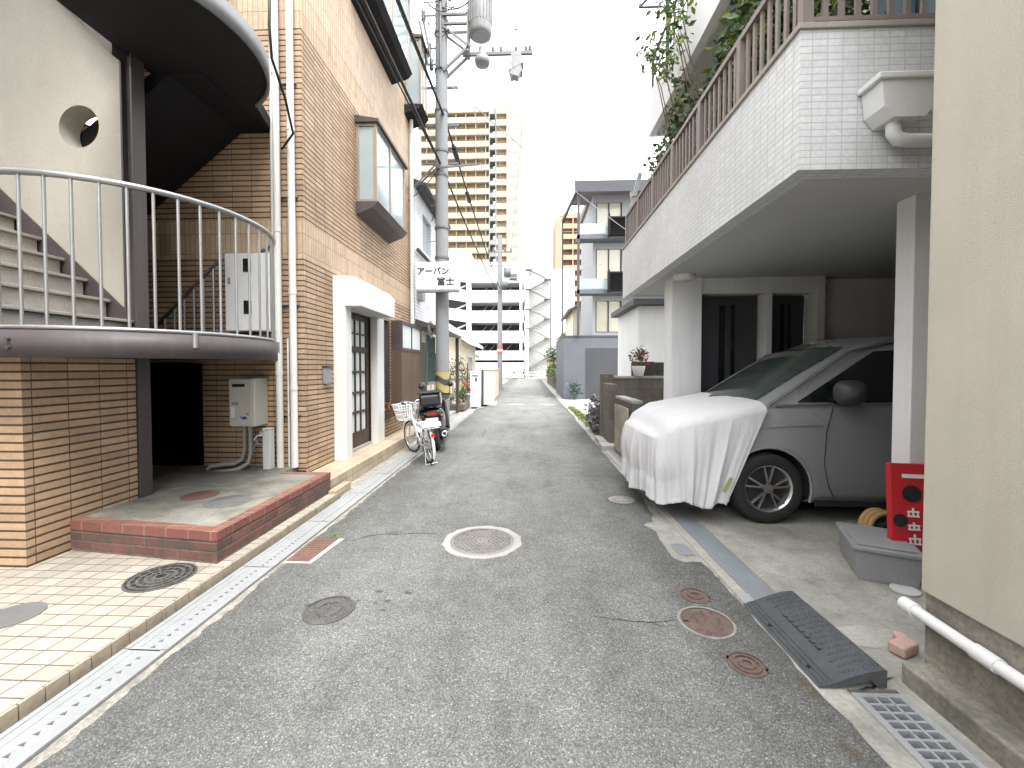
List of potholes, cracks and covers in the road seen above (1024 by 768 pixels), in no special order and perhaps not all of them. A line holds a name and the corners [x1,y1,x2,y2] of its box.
manhole cover [302,595,356,625]
drain grate [851,692,987,768]
manhole cover [677,606,737,640]
manhole cover [680,588,714,604]
manhole cover [606,495,637,505]
drain grate [284,538,345,564]
manhole cover [442,526,522,559]
manhole cover [722,651,773,679]
